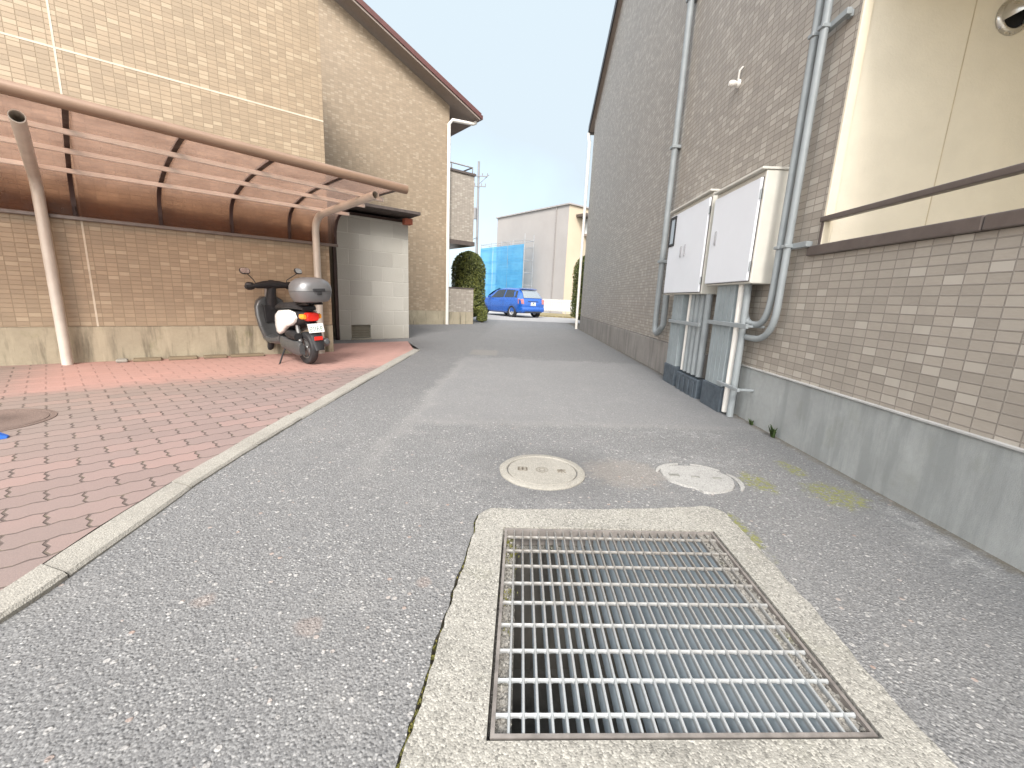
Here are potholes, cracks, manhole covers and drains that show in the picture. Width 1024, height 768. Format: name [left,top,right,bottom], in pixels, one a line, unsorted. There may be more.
drain grate [490,528,878,741]
manhole cover [0,409,58,432]
manhole cover [499,454,585,491]
manhole cover [655,463,745,494]
